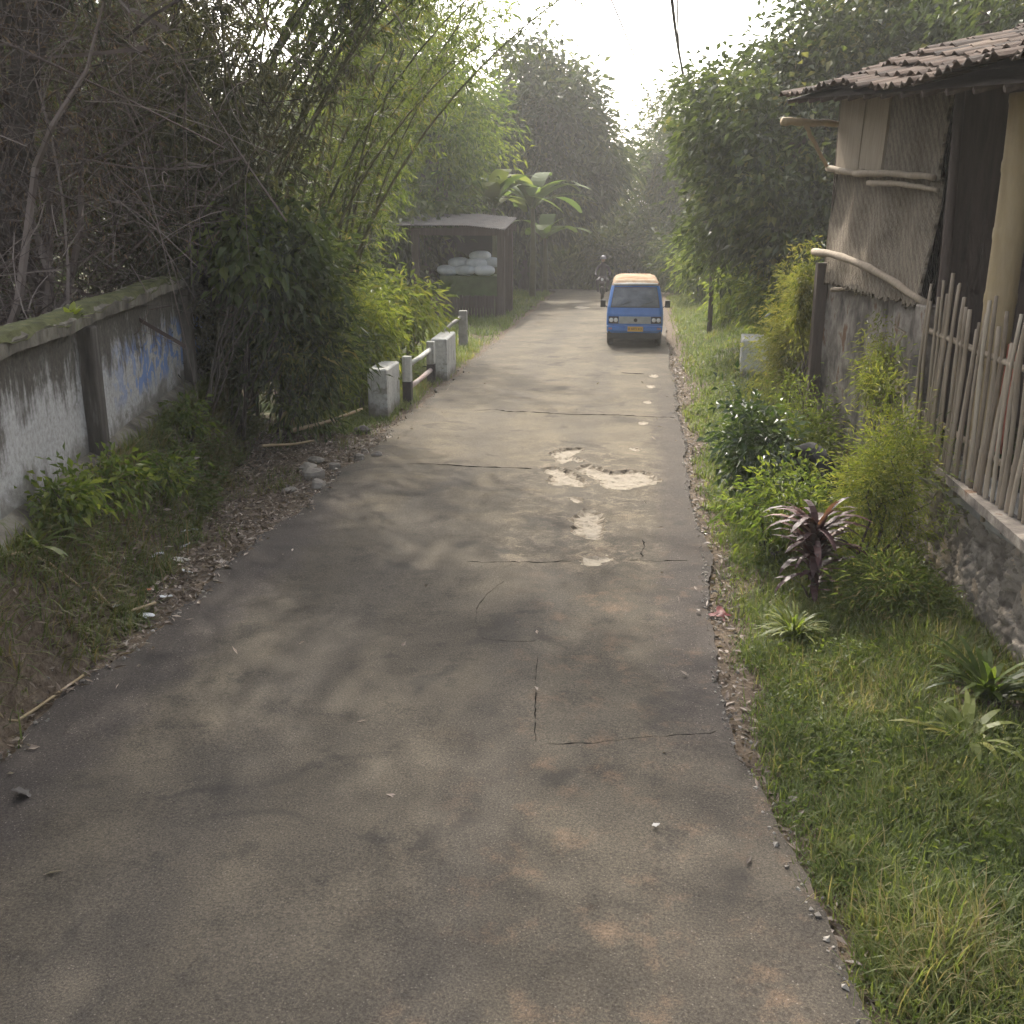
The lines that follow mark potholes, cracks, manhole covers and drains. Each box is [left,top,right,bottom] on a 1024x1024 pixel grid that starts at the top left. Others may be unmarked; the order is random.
crack [467,540,687,563]
crack [475,581,715,746]
